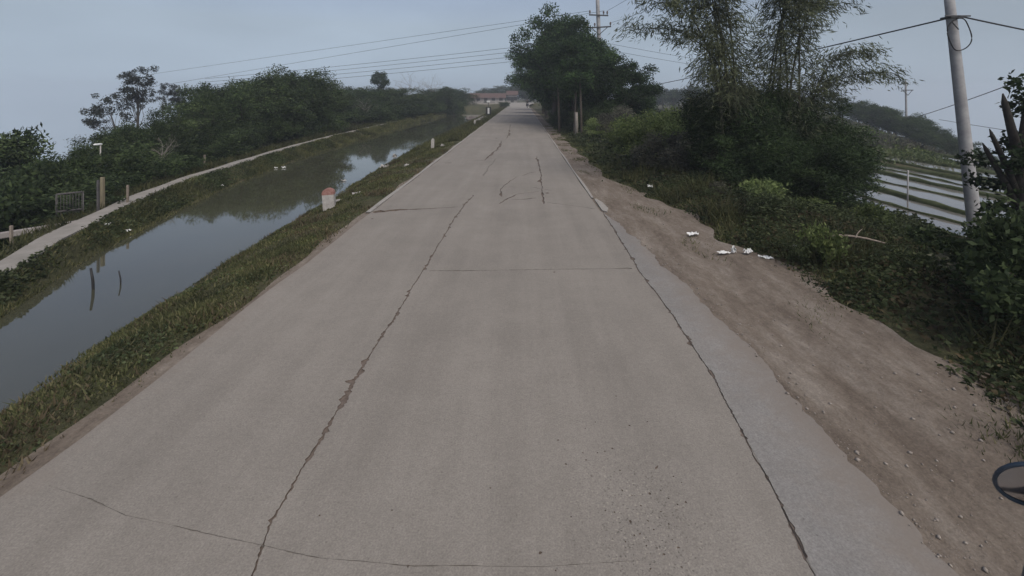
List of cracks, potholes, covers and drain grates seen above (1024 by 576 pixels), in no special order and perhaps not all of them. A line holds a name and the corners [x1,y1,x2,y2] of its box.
crack [251,195,474,576]
crack [475,124,815,576]
